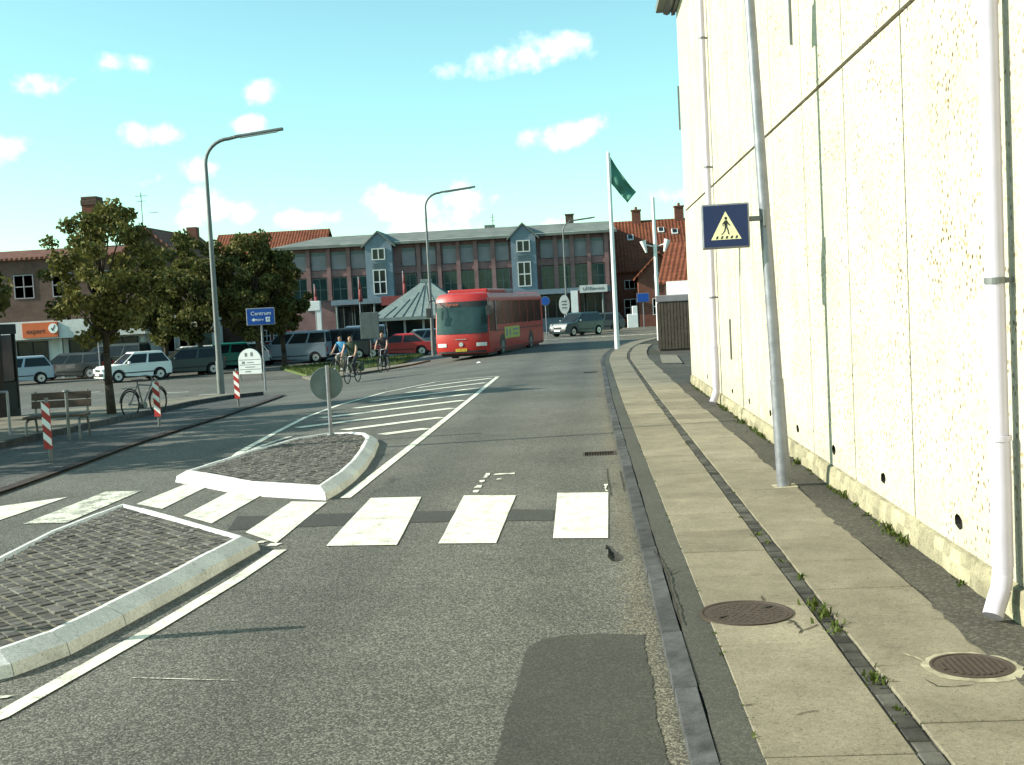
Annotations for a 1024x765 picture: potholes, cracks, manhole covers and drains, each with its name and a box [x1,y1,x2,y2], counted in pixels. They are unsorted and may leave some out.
crack [904,653,973,687]
manhole cover [699,600,793,626]
pothole [605,545,624,562]
crack [654,550,682,624]
manhole cover [920,652,1024,683]
